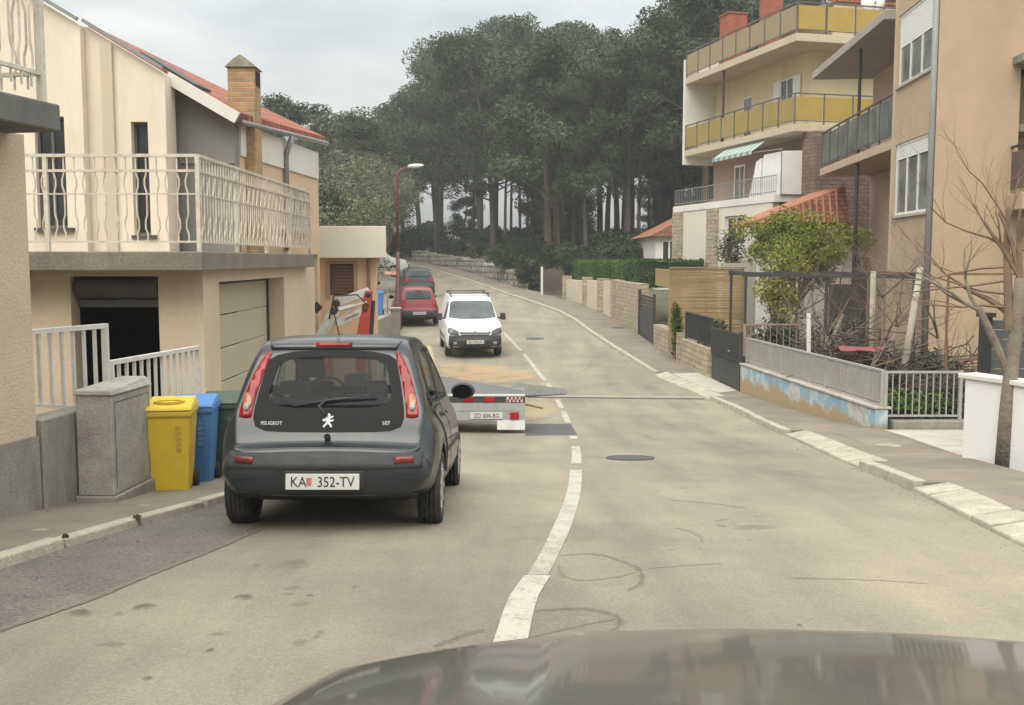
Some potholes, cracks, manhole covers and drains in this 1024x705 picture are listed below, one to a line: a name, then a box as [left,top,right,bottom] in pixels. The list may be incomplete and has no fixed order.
crack [528,607,625,638]
crack [433,629,484,649]
crack [556,487,758,590]
